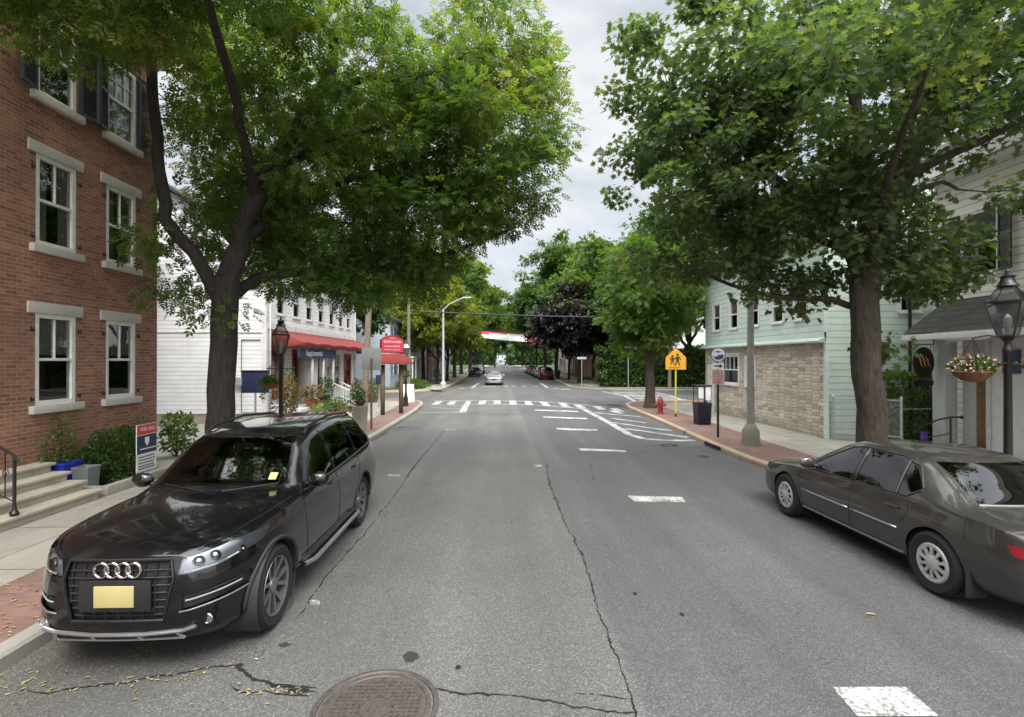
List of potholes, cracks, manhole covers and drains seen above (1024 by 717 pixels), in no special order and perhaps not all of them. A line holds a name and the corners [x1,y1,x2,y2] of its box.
manhole cover [309,669,439,717]
crack [22,650,317,696]
crack [436,688,635,714]
